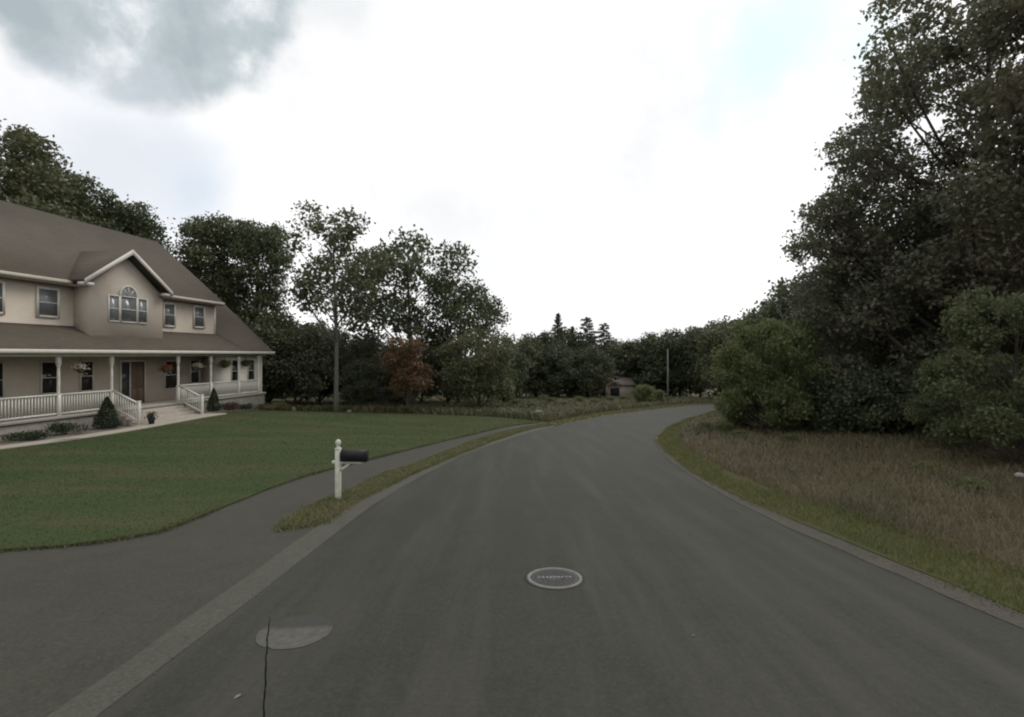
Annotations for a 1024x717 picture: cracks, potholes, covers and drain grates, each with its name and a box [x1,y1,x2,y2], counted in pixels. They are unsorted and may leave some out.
manhole cover [524,567,585,590]
